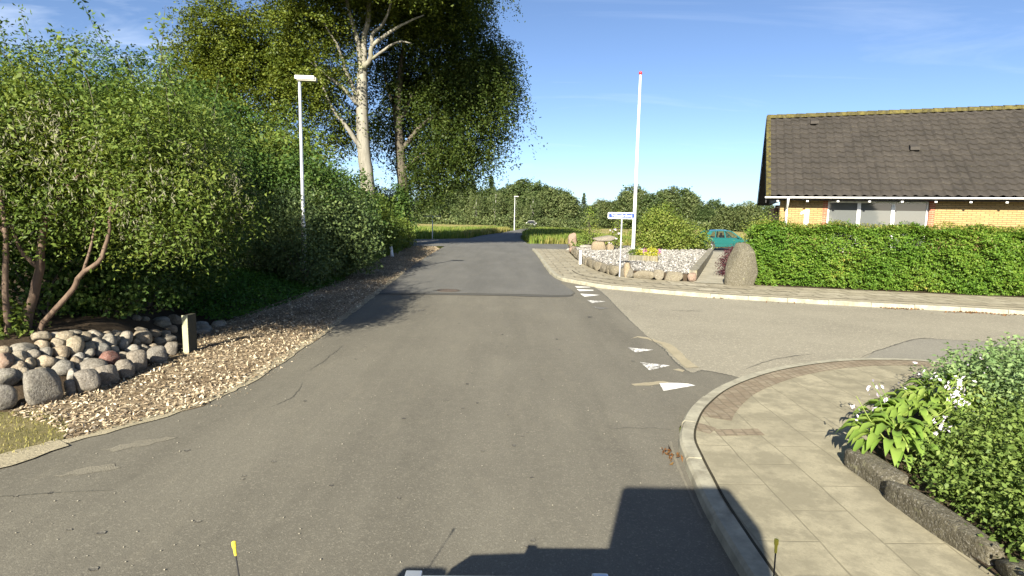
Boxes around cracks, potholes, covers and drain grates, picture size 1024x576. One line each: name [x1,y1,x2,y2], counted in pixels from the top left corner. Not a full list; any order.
crack [647,336,808,376]
